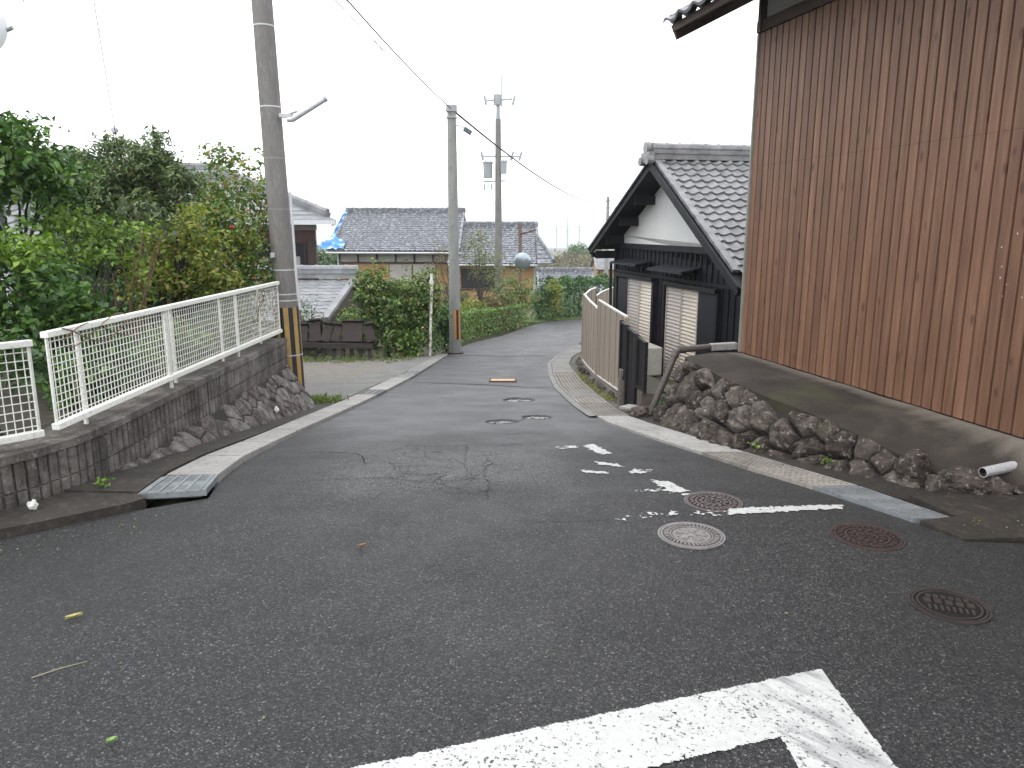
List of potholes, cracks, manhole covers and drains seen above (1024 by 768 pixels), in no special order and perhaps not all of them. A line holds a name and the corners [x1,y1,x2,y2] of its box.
drain grate [137,474,218,500]
crack [301,418,524,508]
manhole cover [657,522,726,550]
manhole cover [830,523,906,551]
manhole cover [907,587,993,625]
manhole cover [684,491,743,512]
